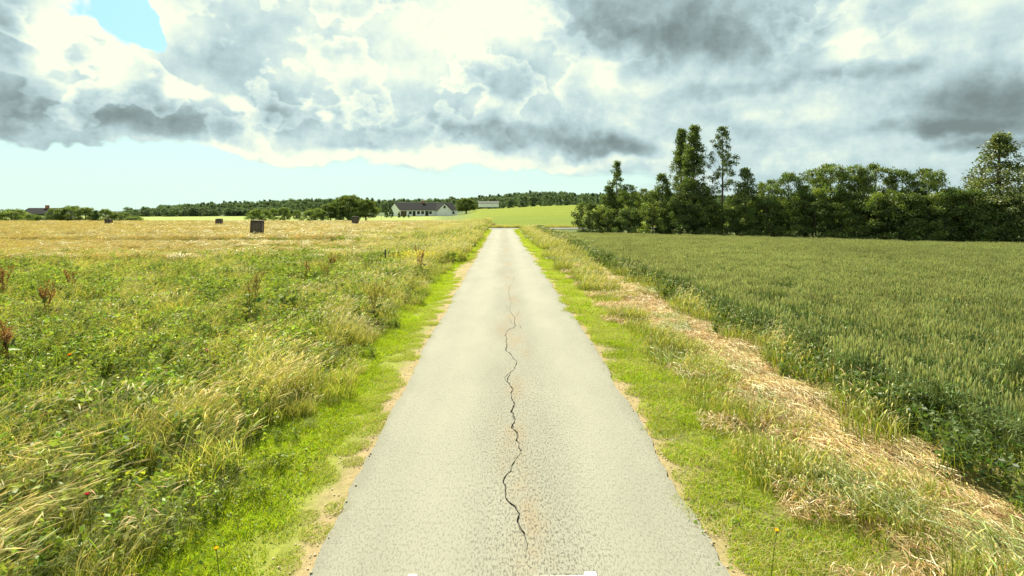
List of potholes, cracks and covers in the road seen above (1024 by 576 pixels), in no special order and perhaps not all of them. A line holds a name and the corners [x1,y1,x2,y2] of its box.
crack [503,276,528,551]
